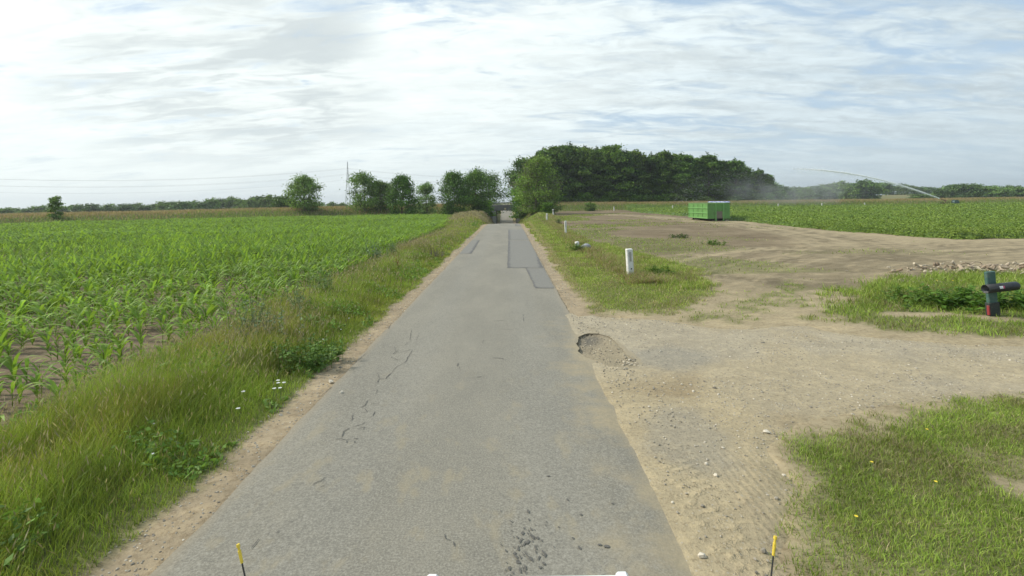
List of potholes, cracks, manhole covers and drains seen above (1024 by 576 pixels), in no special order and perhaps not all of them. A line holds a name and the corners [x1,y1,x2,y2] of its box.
pothole [577,334,638,368]
crack [321,323,417,396]
